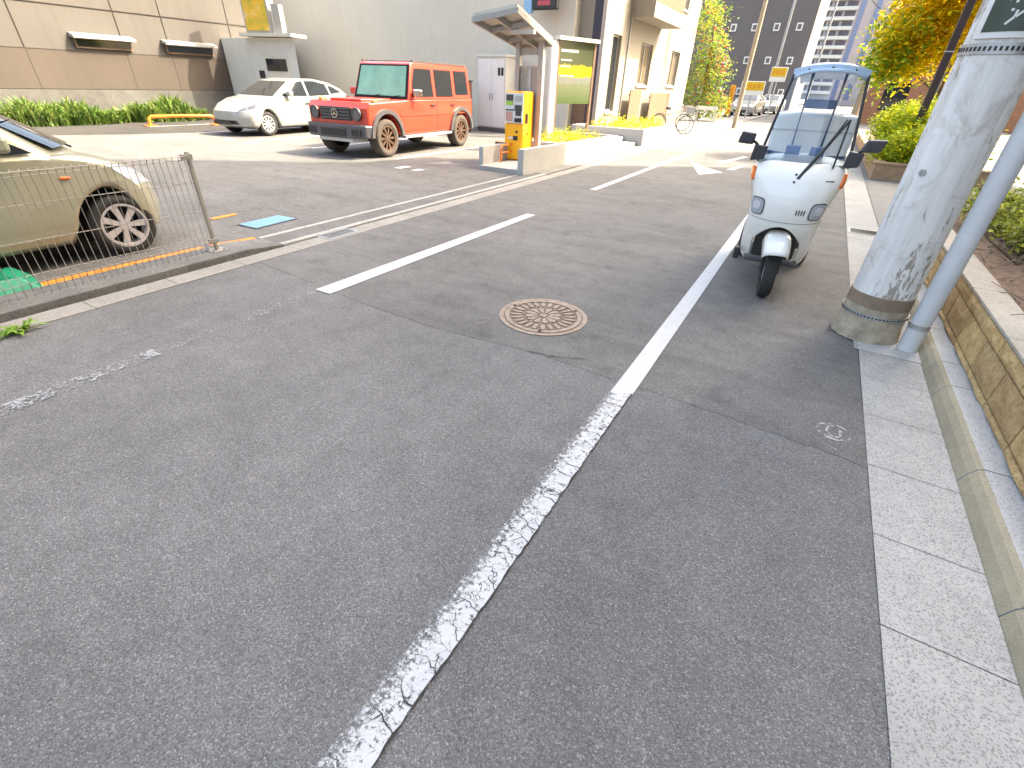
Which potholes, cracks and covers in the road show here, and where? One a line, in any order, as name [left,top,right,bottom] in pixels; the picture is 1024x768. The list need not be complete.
manhole cover [499,298,587,336]
